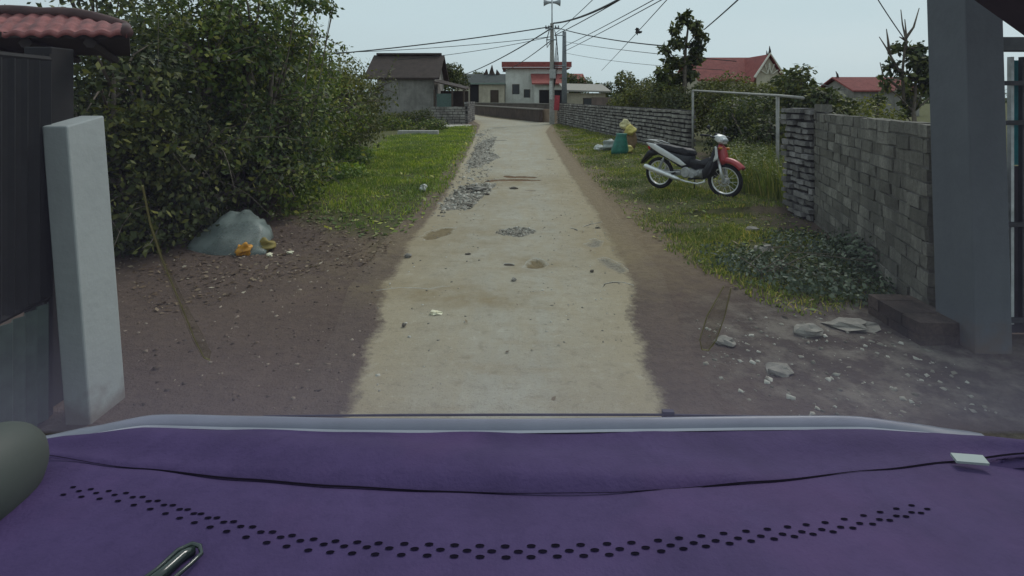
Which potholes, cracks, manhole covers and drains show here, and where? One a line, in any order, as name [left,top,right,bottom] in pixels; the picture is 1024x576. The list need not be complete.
pothole [419,227,457,241]
crack [484,159,550,191]
pothole [464,136,501,169]
pothole [437,183,496,211]
pothole [522,258,550,269]
pothole [495,227,537,237]
